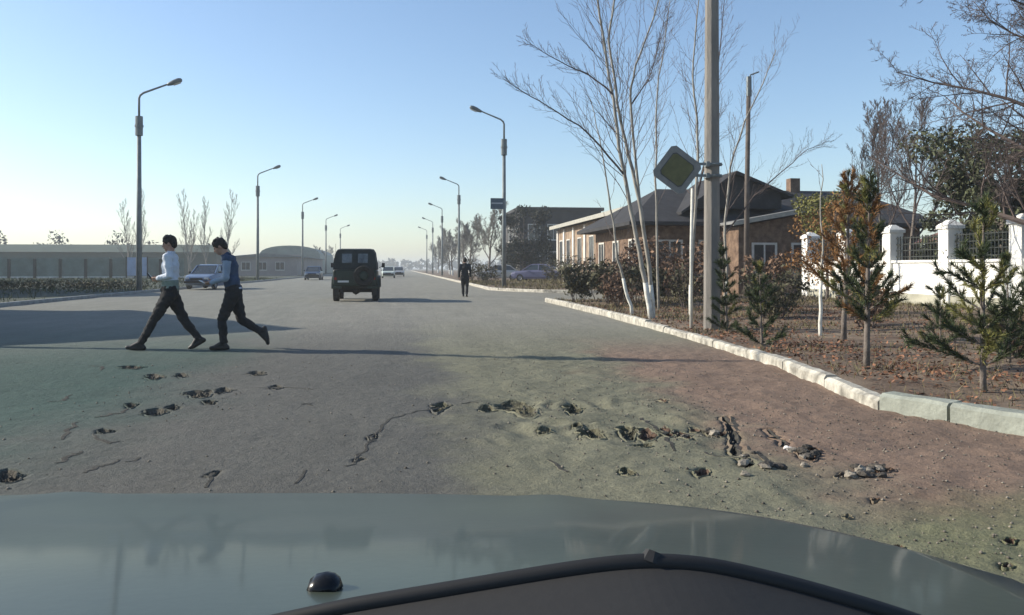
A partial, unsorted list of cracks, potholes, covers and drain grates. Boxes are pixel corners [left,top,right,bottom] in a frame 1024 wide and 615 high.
pothole [614,425,641,442]
crack [346,408,439,467]
pothole [573,427,607,440]
pothole [181,389,216,399]
pothole [139,407,169,417]
pothole [619,467,637,477]
pothole [536,425,556,436]
pothole [636,427,660,443]
pothole [429,401,453,415]
crack [703,416,790,464]
pothole [561,404,586,416]
pothole [793,447,822,463]
